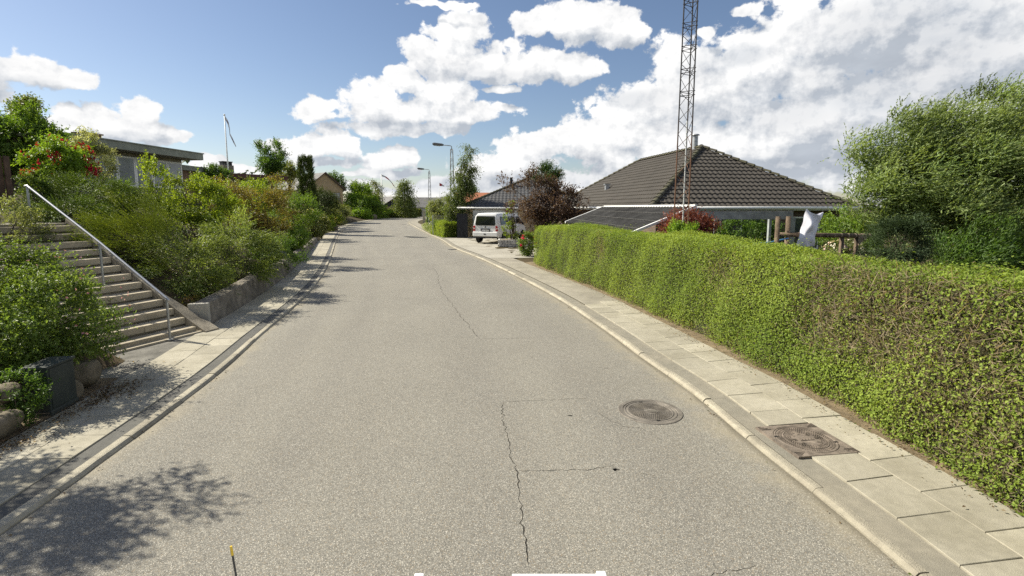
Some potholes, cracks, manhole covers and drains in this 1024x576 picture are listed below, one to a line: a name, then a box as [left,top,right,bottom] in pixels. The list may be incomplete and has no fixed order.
crack [501,398,606,564]
manhole cover [618,399,683,425]
manhole cover [755,423,860,459]
